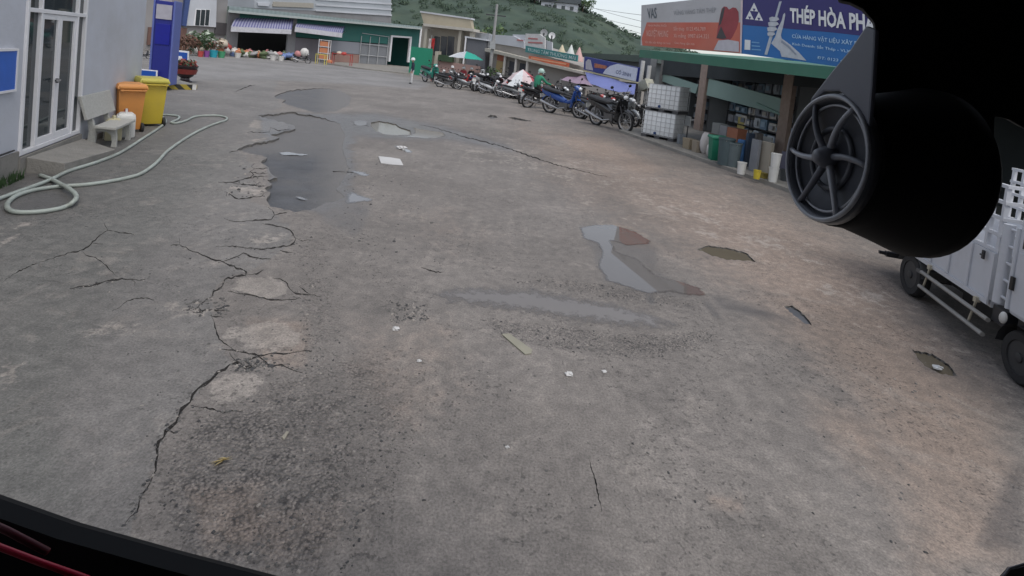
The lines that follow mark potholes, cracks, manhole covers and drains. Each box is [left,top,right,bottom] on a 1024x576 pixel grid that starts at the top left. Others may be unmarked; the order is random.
pothole [913,350,957,376]
pothole [238,112,349,212]
pothole [784,306,811,325]
crack [590,462,602,512]
crack [3,224,154,310]
crack [126,151,319,522]
pothole [698,245,756,262]
pothole [275,88,352,113]
pothole [371,121,411,135]
